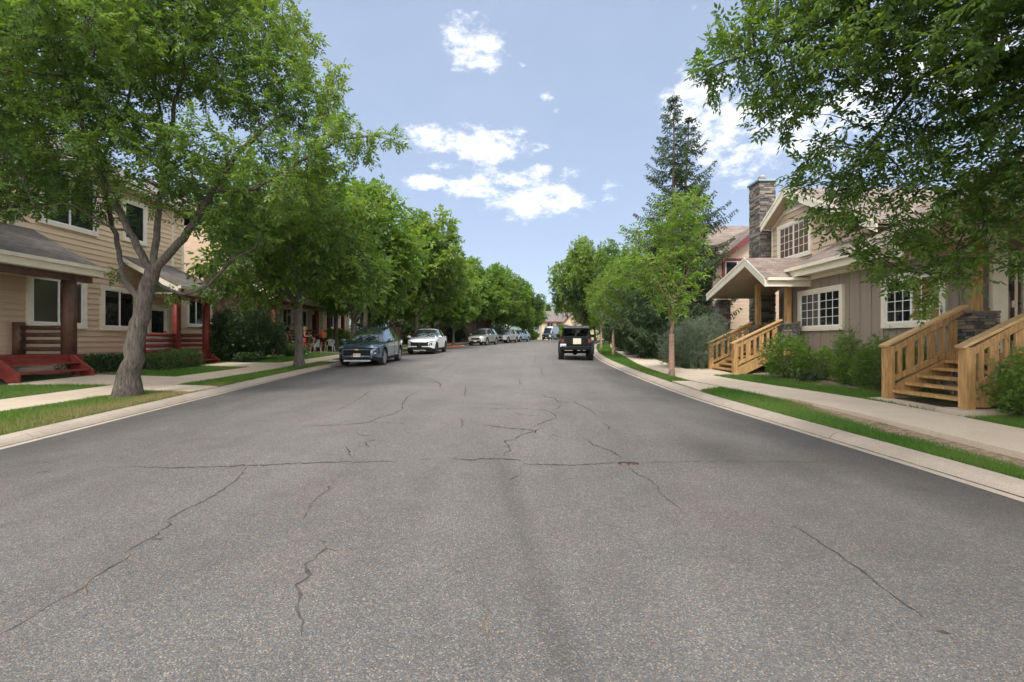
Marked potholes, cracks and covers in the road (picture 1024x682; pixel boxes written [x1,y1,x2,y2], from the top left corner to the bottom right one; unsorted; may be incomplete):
crack [0,393,414,634]
crack [453,358,818,513]
